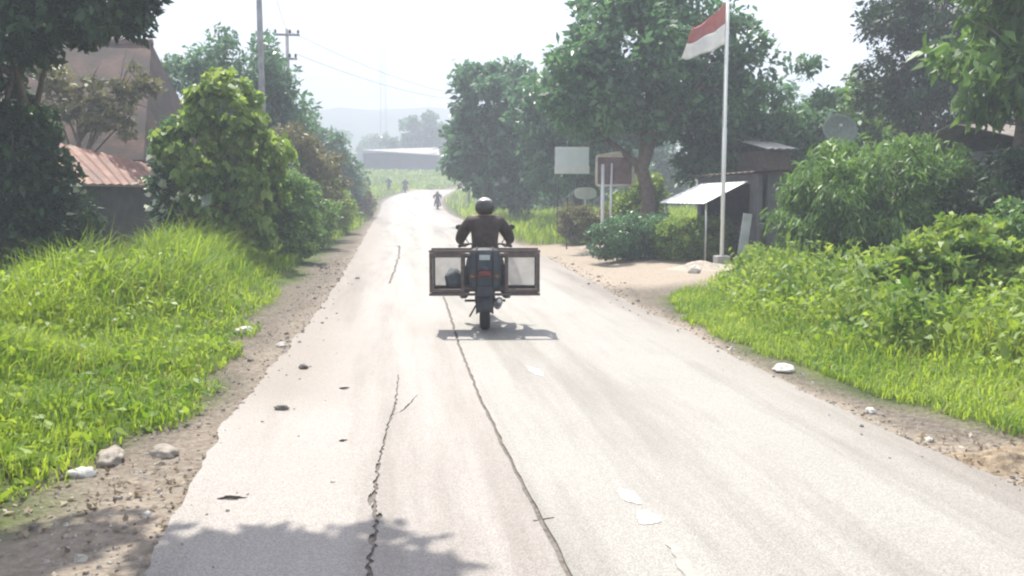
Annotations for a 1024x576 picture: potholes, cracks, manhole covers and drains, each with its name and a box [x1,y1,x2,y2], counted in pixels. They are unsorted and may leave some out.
crack [365,377,416,576]
crack [439,284,573,576]
crack [389,246,401,283]
